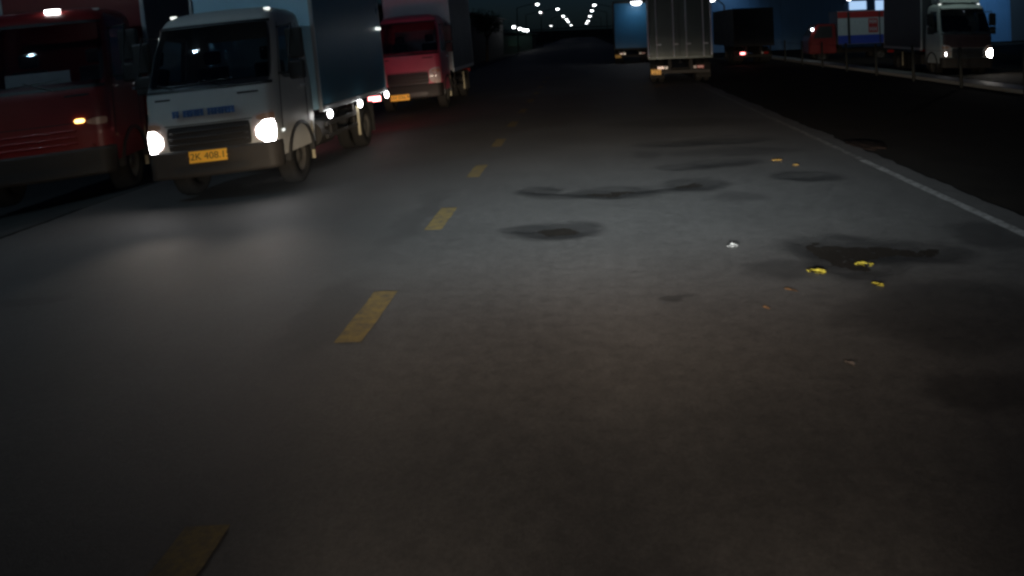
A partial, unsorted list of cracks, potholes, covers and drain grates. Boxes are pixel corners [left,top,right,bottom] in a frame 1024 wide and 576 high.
pothole [782,235,961,280]
pothole [503,221,603,240]
pothole [516,178,721,200]
pothole [663,158,757,171]
pothole [775,173,837,181]
